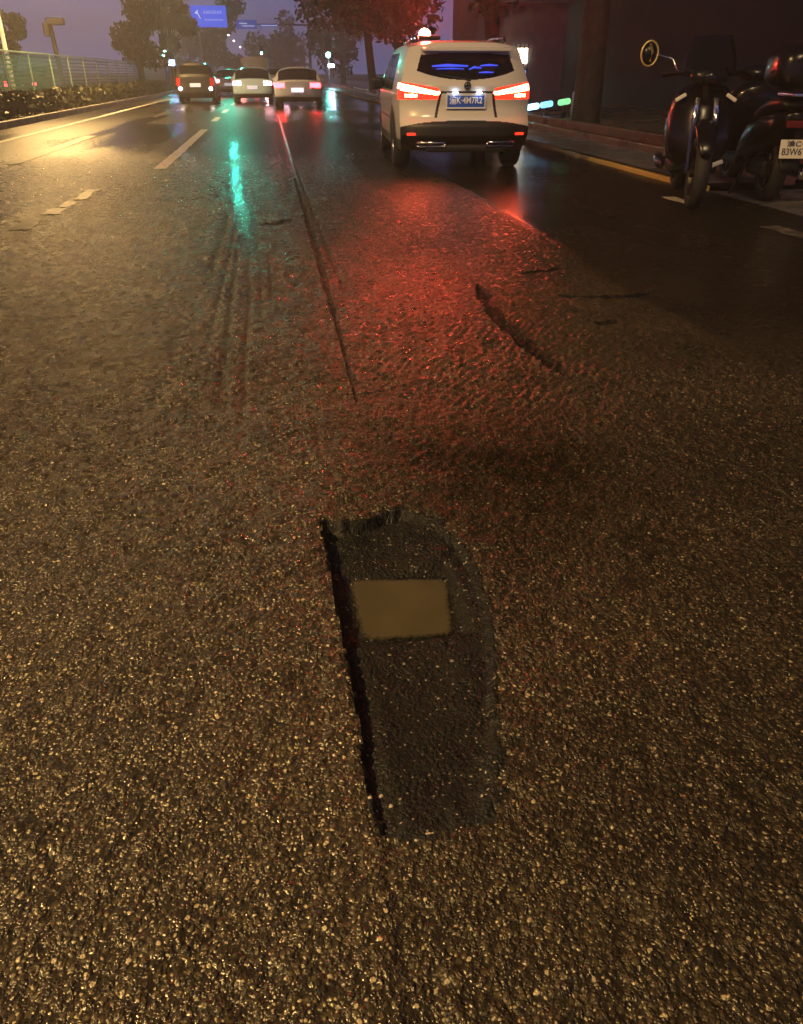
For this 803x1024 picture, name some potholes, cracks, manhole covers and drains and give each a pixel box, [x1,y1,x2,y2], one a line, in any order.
crack [475,267,653,380]
